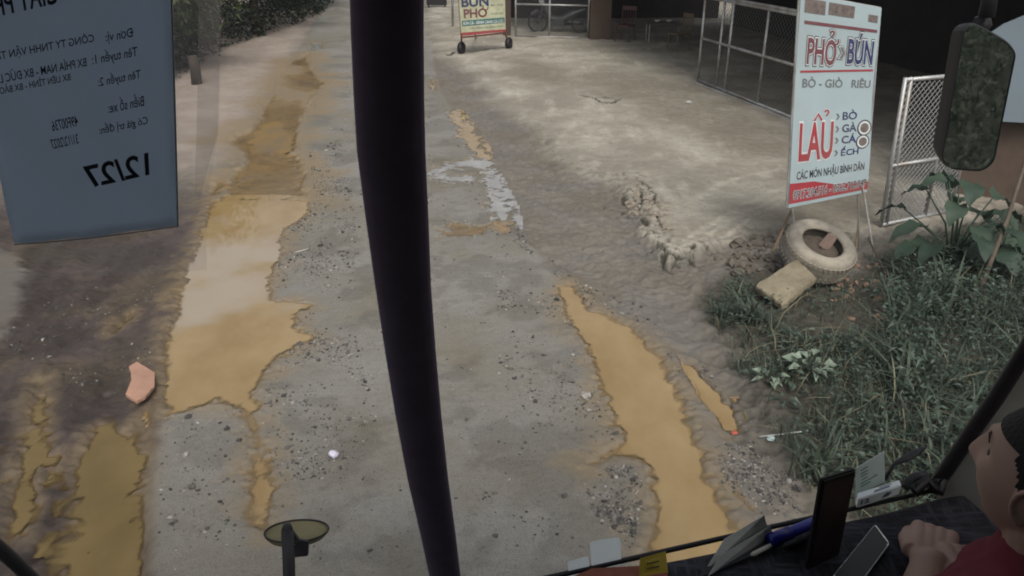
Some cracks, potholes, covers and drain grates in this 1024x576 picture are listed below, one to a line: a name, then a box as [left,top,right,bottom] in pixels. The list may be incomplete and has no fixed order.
pothole [553,277,747,565]
pothole [152,197,321,531]
crack [578,94,623,104]
pothole [446,108,490,161]
pothole [434,220,512,241]
